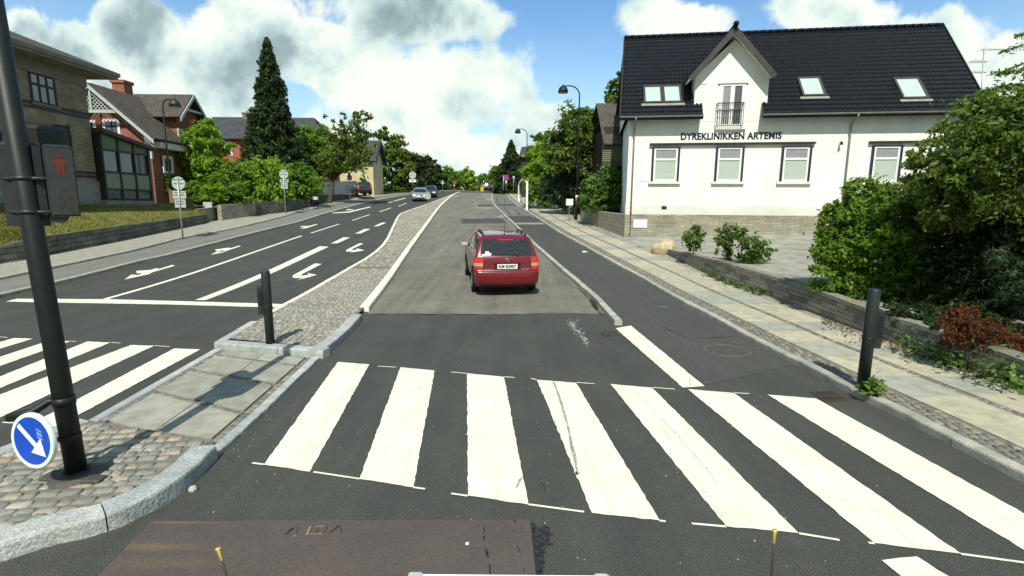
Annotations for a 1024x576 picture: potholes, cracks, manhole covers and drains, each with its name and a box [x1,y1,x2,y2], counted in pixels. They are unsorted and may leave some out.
manhole cover [703,344,752,357]
drain grate [810,390,849,402]
